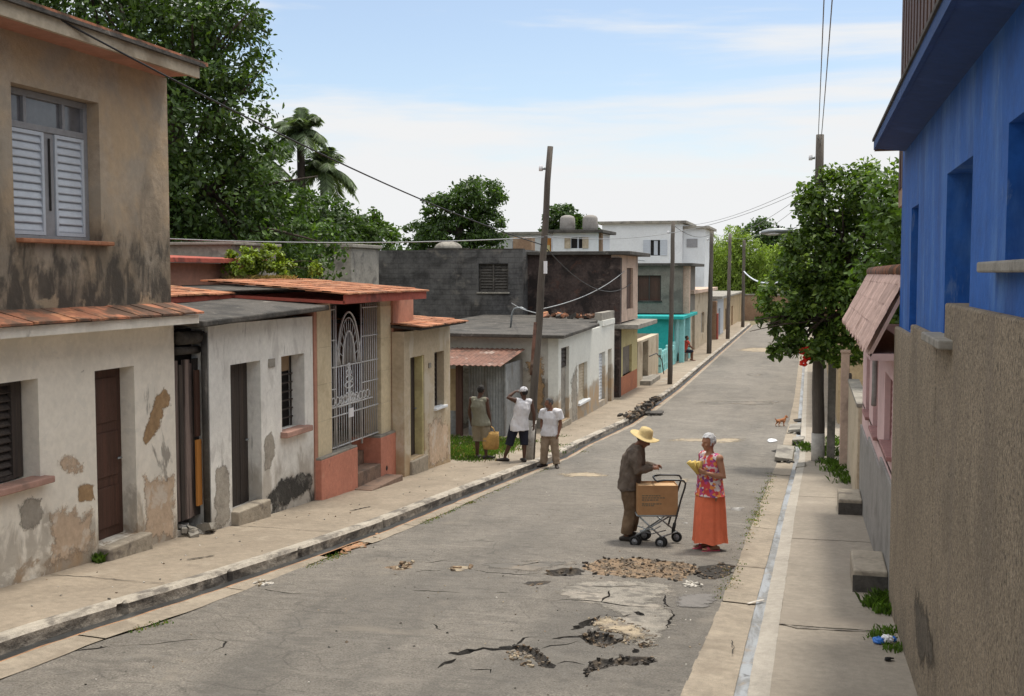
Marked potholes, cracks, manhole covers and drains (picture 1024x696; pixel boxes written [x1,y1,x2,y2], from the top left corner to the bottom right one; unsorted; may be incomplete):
pothole [578,629,623,648]
crack [126,639,227,652]
pothole [545,567,585,576]
pothole [582,556,699,582]
crack [434,586,678,673]
pothole [583,654,657,677]
pothole [512,644,556,668]
